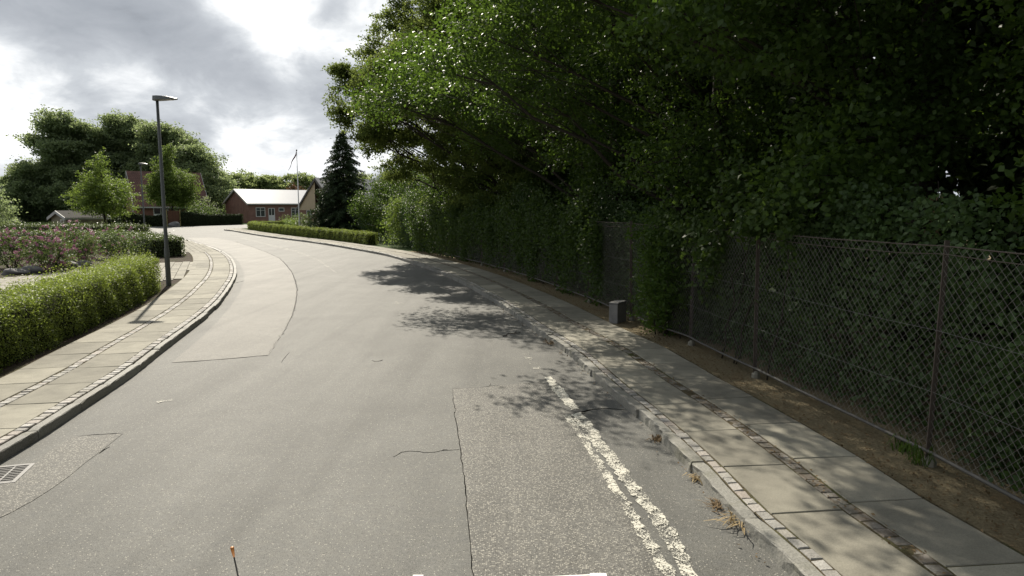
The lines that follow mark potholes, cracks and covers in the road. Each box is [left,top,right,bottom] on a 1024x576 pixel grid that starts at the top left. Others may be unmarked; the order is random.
drain grate [0,463,35,484]
